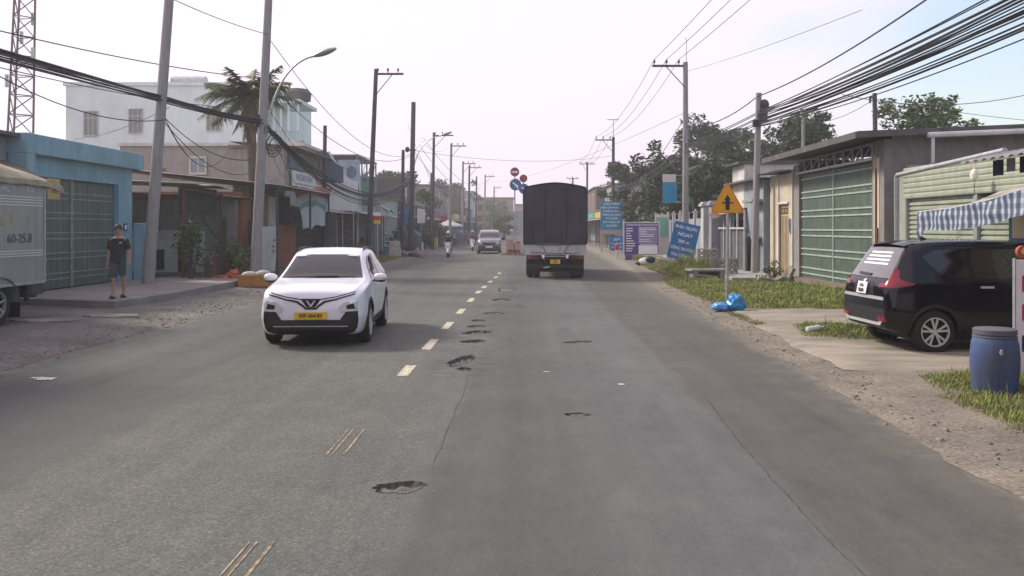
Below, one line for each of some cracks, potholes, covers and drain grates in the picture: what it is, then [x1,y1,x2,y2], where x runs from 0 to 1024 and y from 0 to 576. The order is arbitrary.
pothole [446,354,476,367]
pothole [372,480,427,494]
